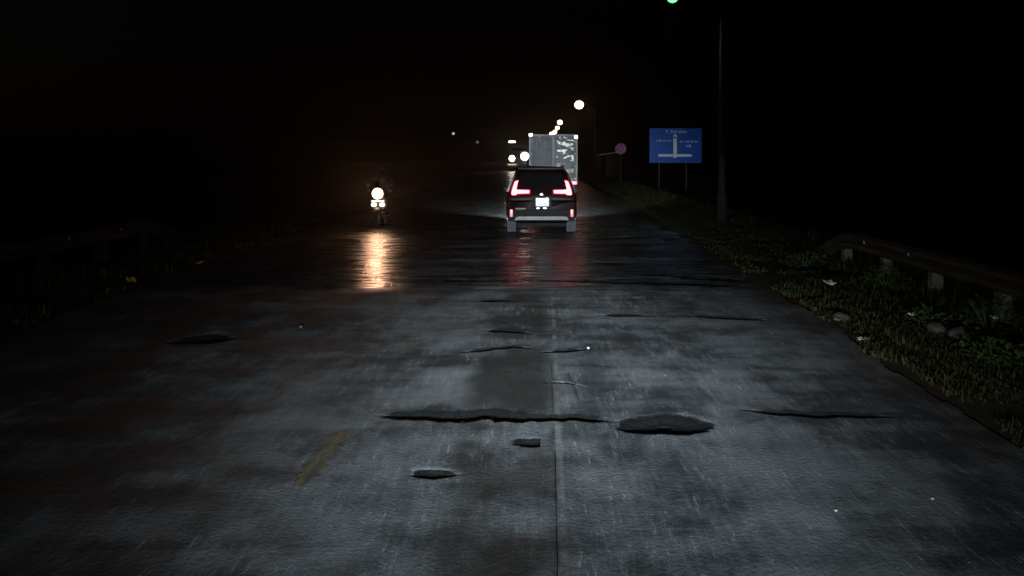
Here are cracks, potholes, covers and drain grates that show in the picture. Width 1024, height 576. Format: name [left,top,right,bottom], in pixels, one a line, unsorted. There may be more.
pothole [603,409,728,440]
crack [738,405,904,422]
crack [680,314,776,322]
crack [455,328,595,355]
pothole [154,330,247,346]
